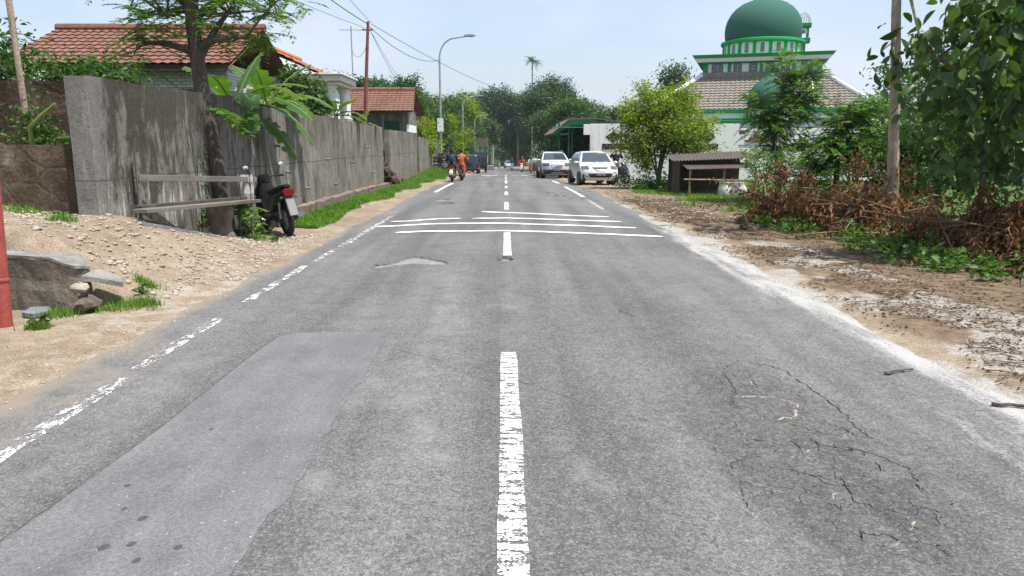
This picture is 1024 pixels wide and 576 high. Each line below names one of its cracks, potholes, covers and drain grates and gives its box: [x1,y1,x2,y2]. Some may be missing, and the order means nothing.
crack [720,360,951,566]
pothole [370,256,448,268]
